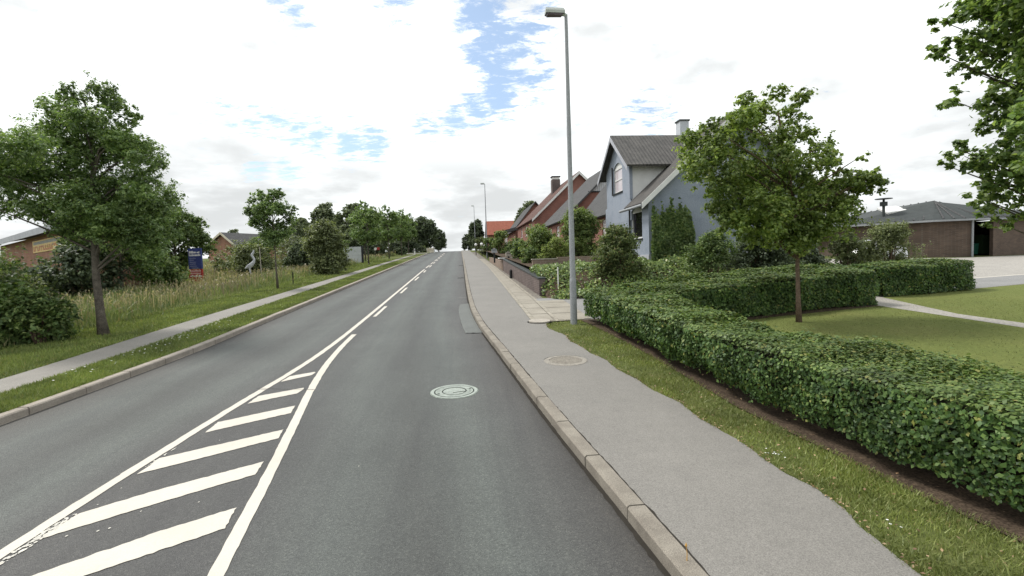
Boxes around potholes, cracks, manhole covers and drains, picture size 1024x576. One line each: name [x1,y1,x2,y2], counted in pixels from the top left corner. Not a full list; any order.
manhole cover [544,355,587,366]
manhole cover [430,384,479,399]
